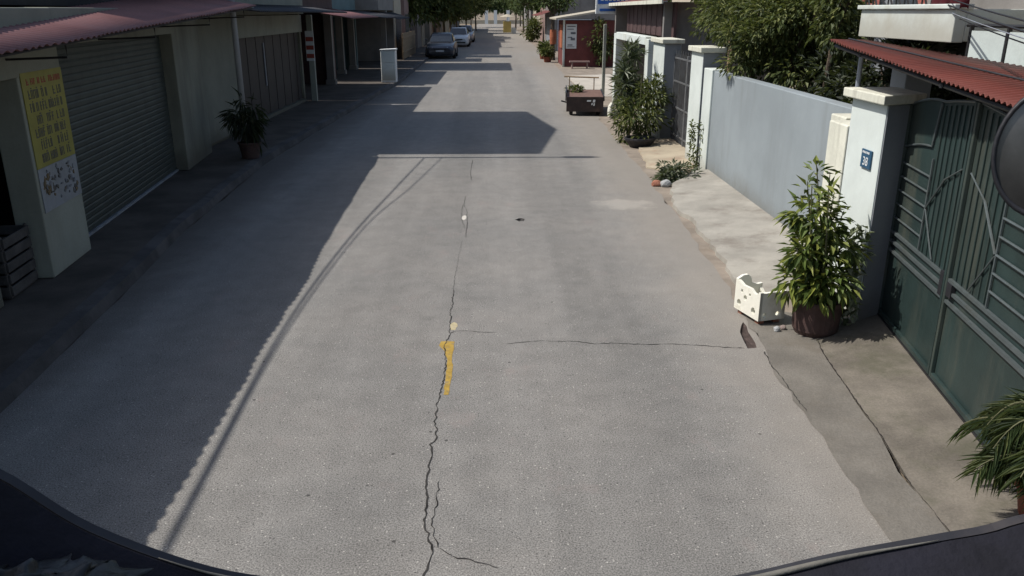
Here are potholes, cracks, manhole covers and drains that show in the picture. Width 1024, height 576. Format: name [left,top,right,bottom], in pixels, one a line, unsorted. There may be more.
crack [422,245,741,576]
pothole [740,323,757,348]
